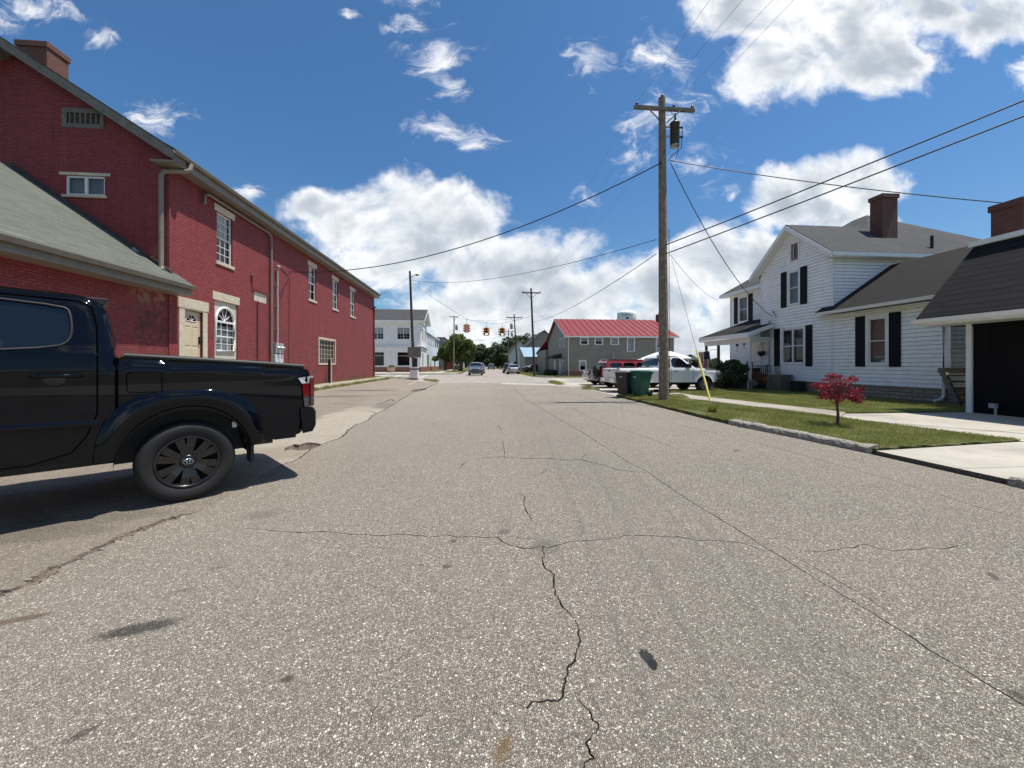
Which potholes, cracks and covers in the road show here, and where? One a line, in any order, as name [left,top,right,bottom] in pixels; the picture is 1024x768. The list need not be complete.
crack [244,492,774,768]
crack [456,424,632,475]
crack [808,544,962,552]
pothole [284,442,321,451]
